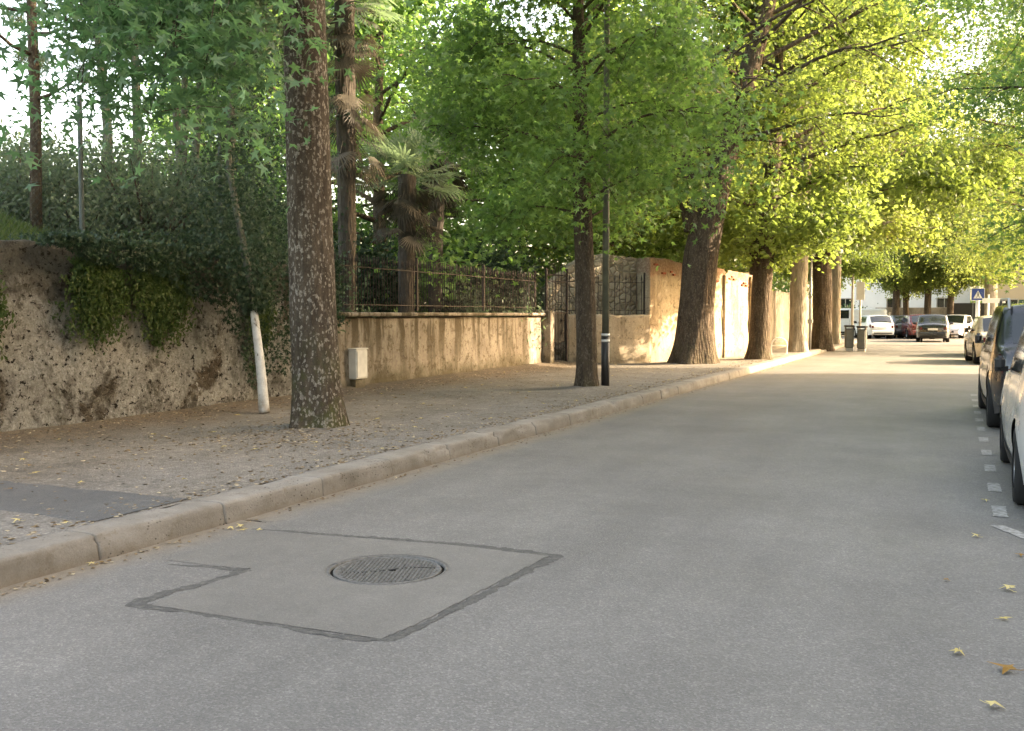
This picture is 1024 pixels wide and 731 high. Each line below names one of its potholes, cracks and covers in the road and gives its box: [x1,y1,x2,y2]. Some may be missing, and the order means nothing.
manhole cover [327,555,448,585]
